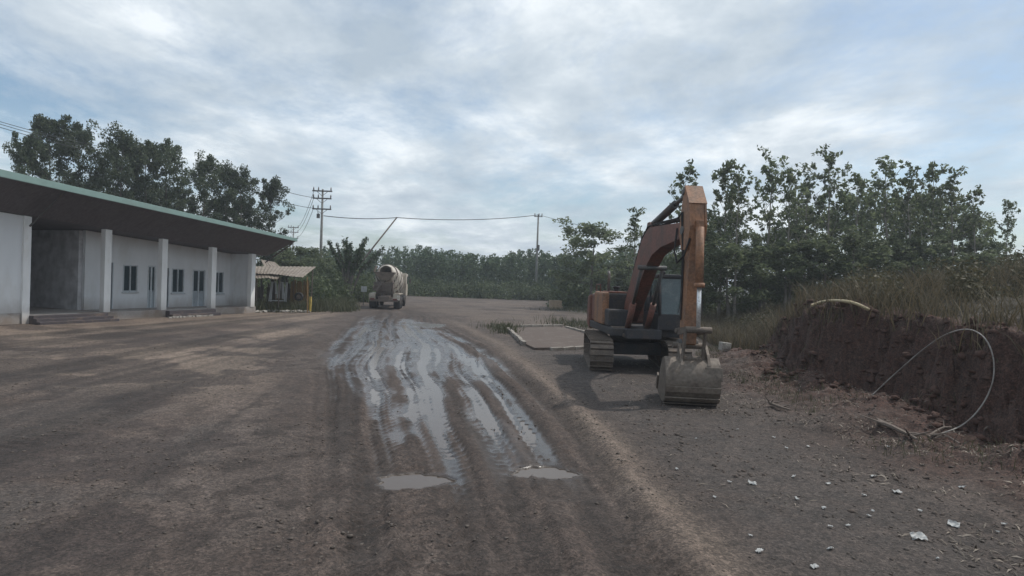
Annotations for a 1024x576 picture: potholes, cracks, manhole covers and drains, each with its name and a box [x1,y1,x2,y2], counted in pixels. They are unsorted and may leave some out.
pothole [374,472,457,490]
pothole [508,466,583,480]
